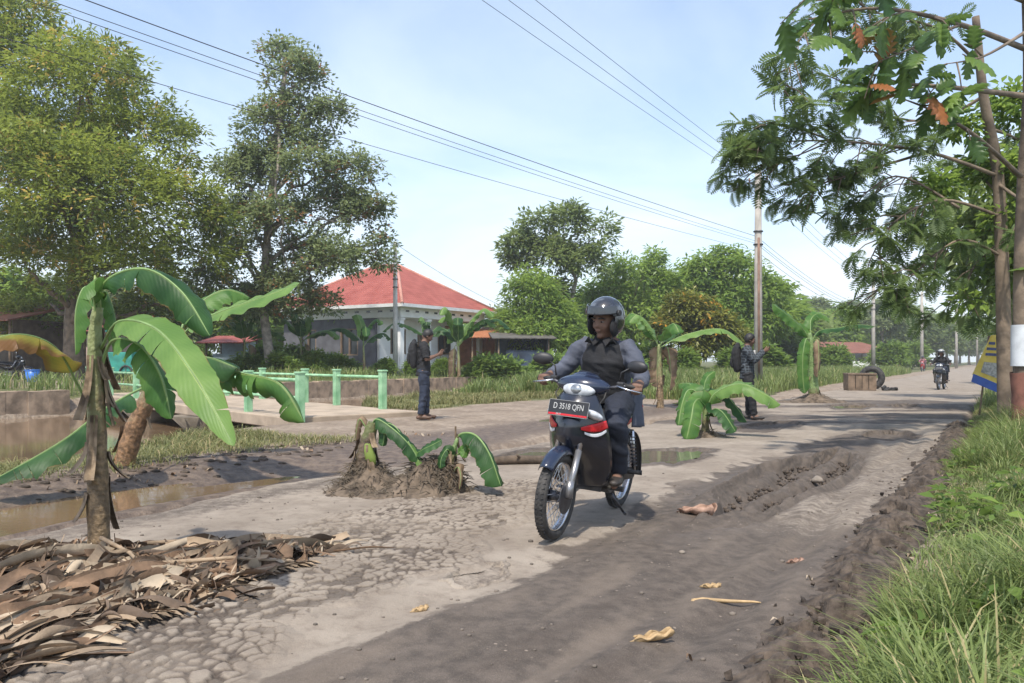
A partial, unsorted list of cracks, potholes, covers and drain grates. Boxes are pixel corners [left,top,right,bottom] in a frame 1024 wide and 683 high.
pothole [641,447,717,466]
pothole [856,429,921,441]
pothole [681,446,866,532]
